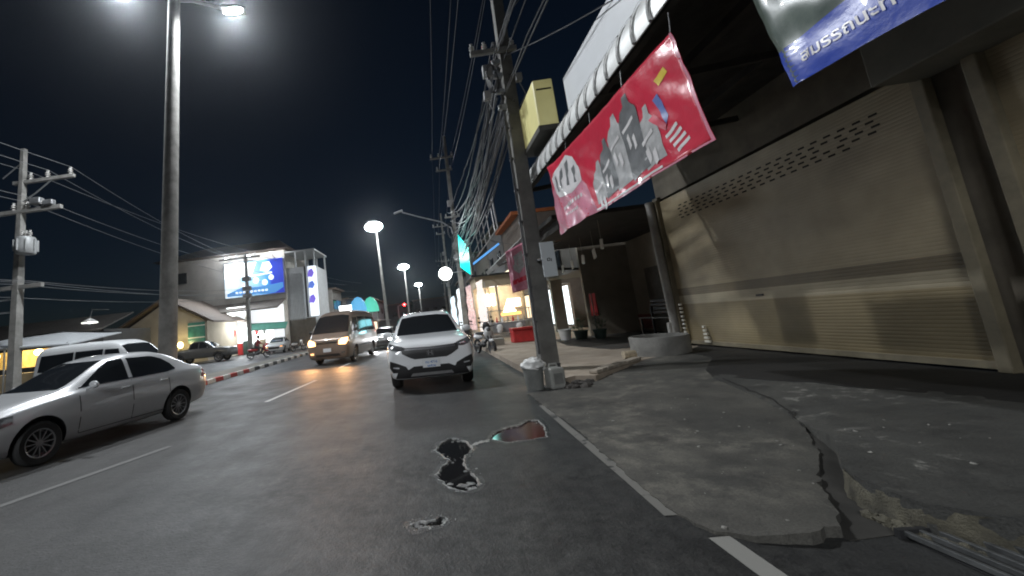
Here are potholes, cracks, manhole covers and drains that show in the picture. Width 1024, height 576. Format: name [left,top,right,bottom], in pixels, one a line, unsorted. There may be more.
crack [723,378,804,427]
pothole [487,419,551,444]
pothole [429,437,485,494]
pothole [403,514,456,535]
